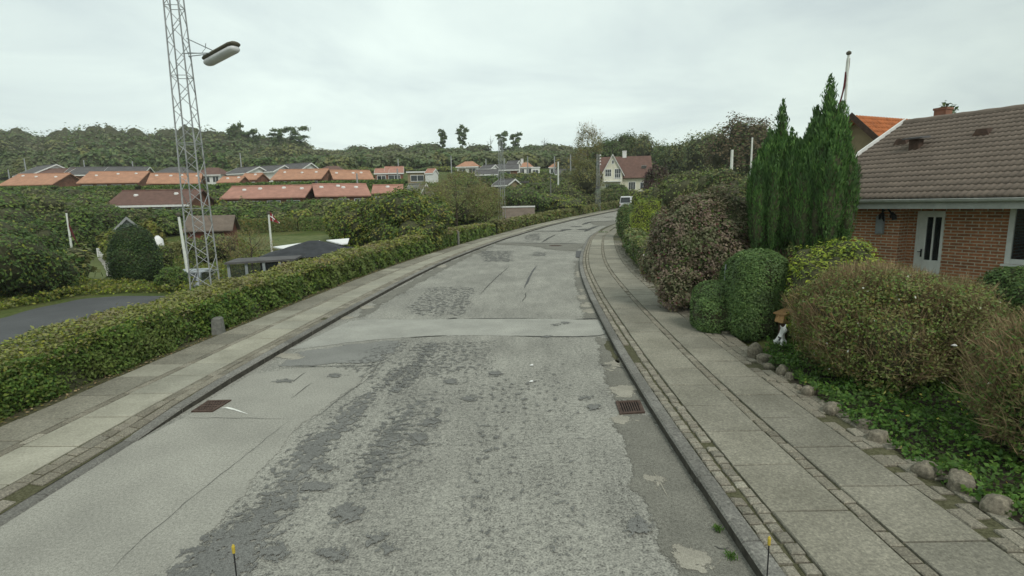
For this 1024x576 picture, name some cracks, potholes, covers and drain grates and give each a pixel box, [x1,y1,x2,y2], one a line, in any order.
drain grate [615,400,645,415]
drain grate [191,400,231,412]
